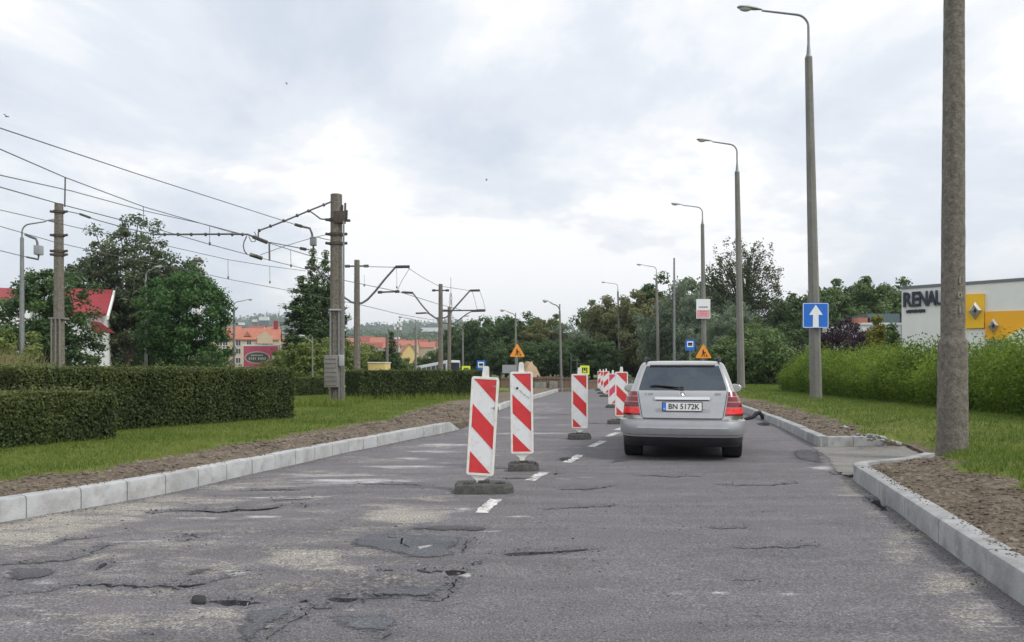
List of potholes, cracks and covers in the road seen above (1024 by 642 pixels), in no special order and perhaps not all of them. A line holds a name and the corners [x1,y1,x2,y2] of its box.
crack [266,607,332,640]
crack [2,538,110,565]
crack [417,542,478,602]
crack [543,486,615,510]
